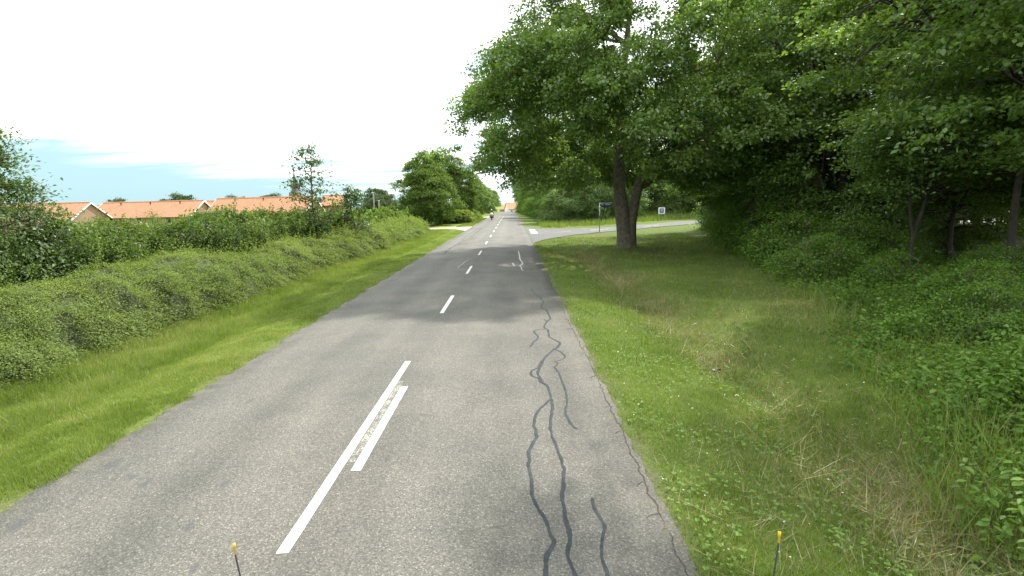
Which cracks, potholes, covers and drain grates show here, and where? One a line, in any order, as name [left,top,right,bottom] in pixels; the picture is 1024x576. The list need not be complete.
crack [538,264,689,576]
